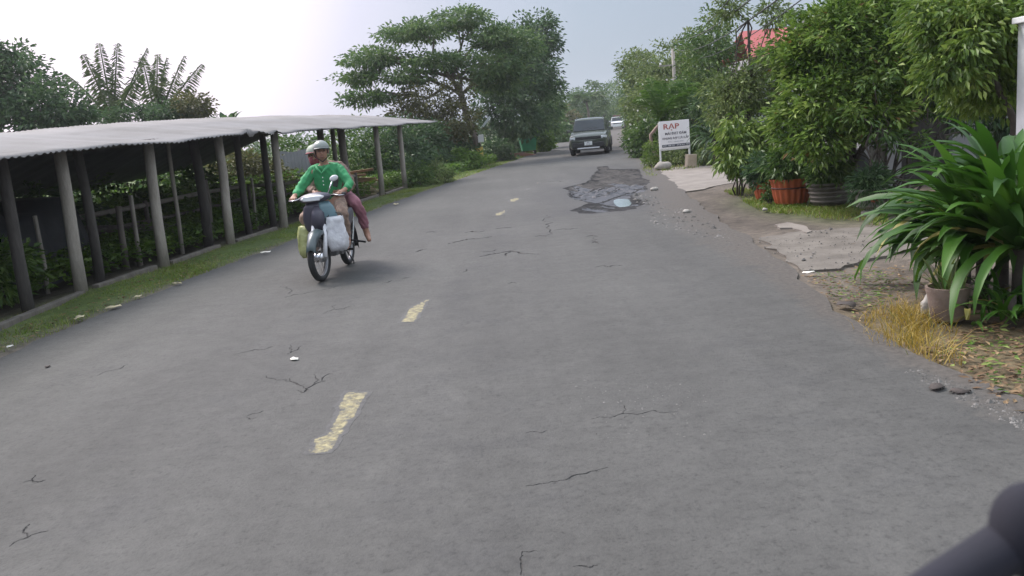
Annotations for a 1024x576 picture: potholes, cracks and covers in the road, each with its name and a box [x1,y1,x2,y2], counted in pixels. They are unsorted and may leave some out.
crack [266,374,328,393]
pothole [563,166,650,214]
crack [449,227,530,271]
